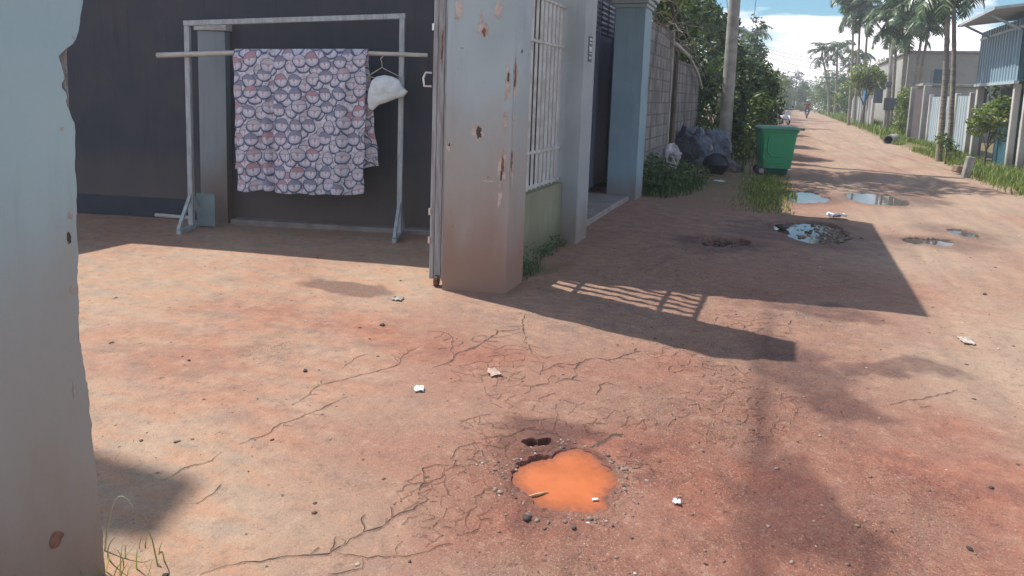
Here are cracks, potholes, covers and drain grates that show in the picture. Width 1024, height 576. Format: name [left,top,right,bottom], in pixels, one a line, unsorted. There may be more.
crack [891,389,958,408]
pothole [935,227,993,240]
pothole [761,219,863,247]
crack [165,309,803,576]
pothole [501,444,630,521]
pothole [688,235,762,250]
pothole [513,436,562,452]
pothole [832,192,926,209]
pothole [763,189,845,205]
pothole [890,236,967,249]
